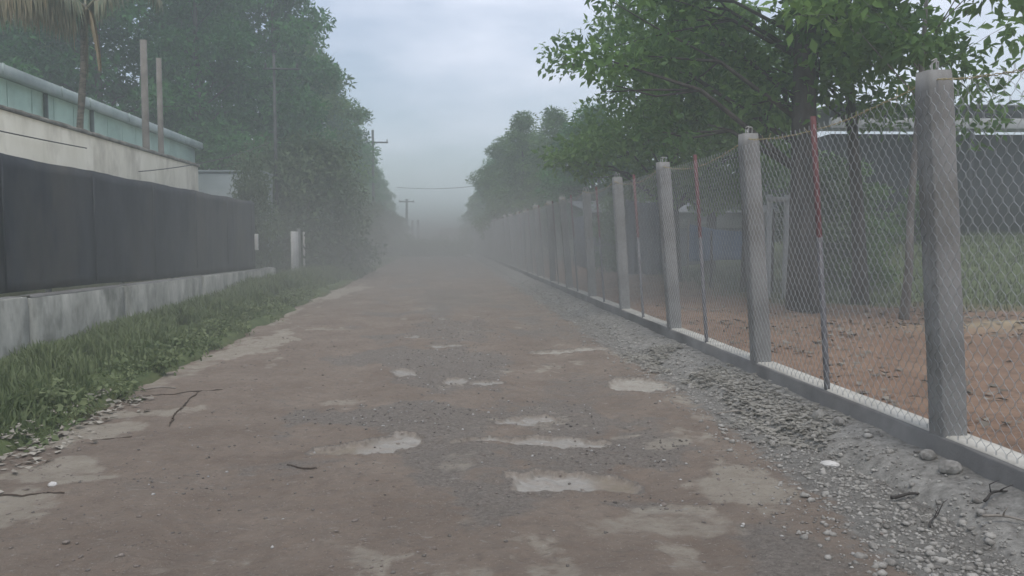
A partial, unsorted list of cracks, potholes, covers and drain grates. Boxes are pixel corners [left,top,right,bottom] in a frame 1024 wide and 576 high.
pothole [436,434,616,450]
pothole [466,379,508,387]
crack [143,389,223,427]
pothole [388,367,420,378]
pothole [437,377,472,386]
pothole [598,374,683,396]
pothole [490,413,567,428]
pothole [484,466,649,497]
pothole [515,346,620,355]
pothole [300,430,435,458]
